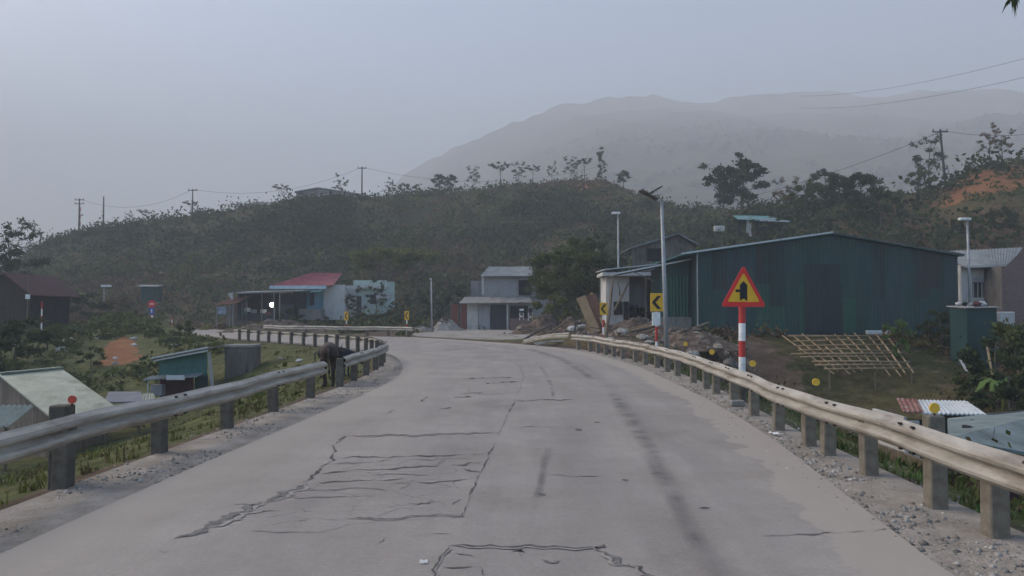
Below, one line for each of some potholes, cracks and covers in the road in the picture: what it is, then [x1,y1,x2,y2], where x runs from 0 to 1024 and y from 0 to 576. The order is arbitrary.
crack [449,363,525,408]
crack [161,435,654,576]
crack [762,528,890,536]
